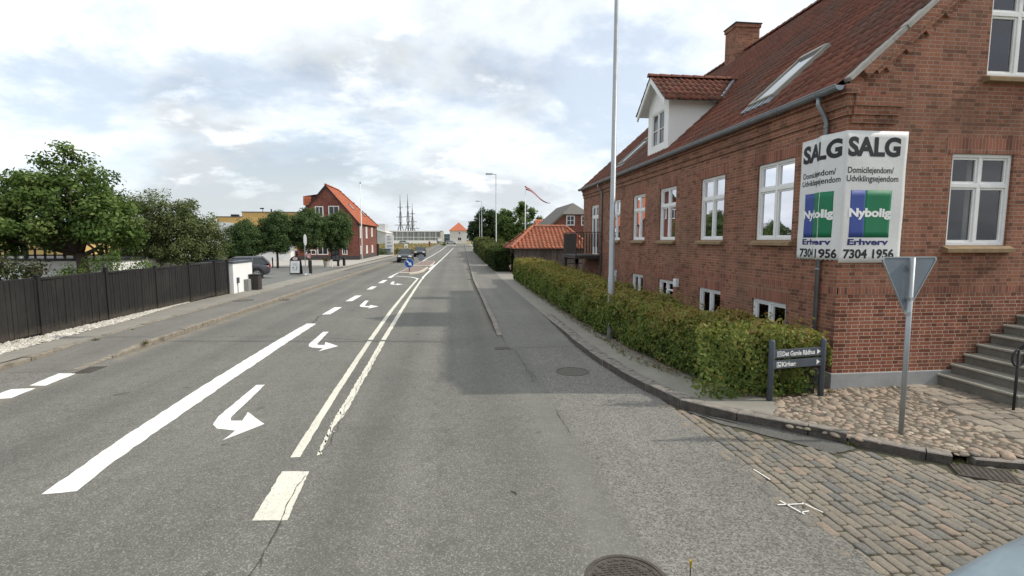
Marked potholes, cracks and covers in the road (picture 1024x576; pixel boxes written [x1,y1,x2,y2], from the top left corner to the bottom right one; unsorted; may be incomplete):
crack [249,475,306,576]
manhole cover [556,367,589,376]
manhole cover [584,554,666,576]
drain grate [948,462,1024,486]
drain grate [72,366,107,374]
